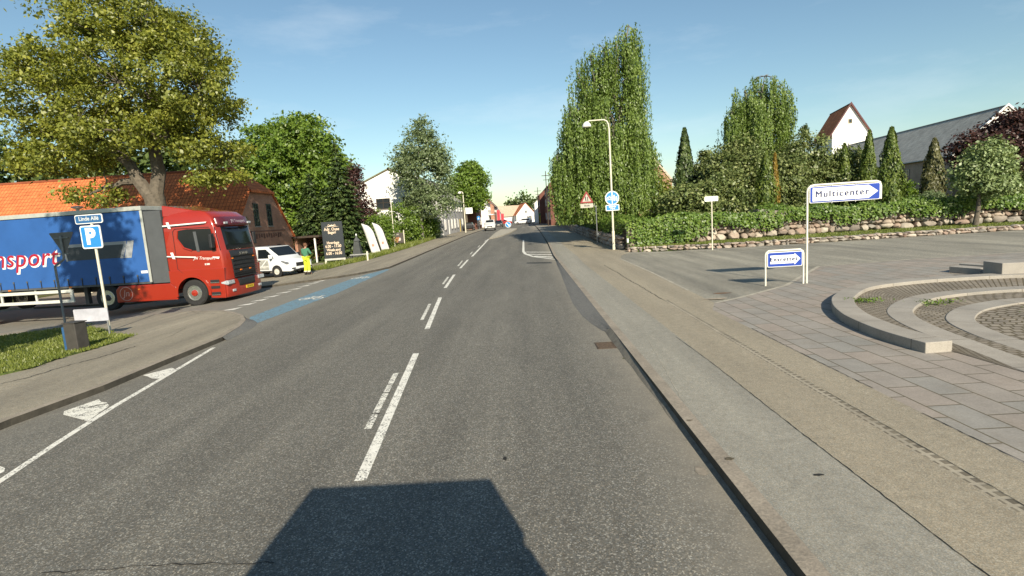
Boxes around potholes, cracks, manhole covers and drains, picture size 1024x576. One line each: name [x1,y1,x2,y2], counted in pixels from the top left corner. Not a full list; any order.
crack [41,561,274,573]
